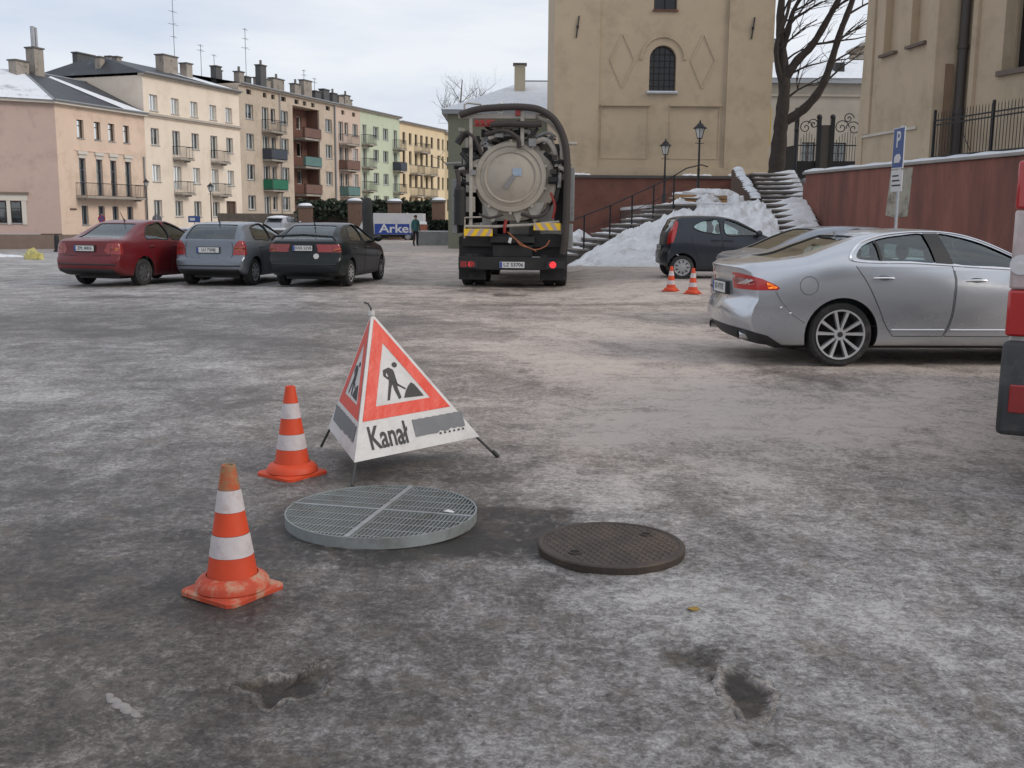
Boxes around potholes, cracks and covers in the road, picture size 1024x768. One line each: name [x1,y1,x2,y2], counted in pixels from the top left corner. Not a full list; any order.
pothole [225,658,344,712]
pothole [711,664,782,725]
manhole cover [538,522,685,575]
